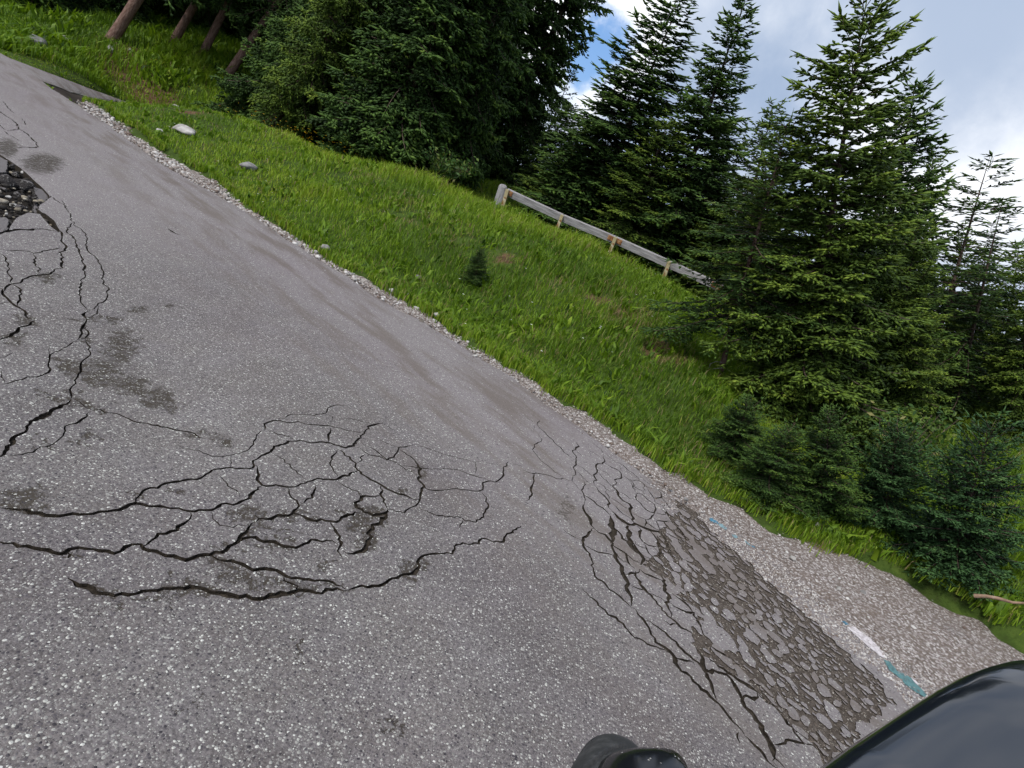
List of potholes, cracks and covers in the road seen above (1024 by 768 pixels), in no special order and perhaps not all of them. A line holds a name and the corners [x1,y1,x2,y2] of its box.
crack [0,102,39,148]
crack [516,419,897,768]
crack [0,196,521,601]
pothole [0,155,59,232]
